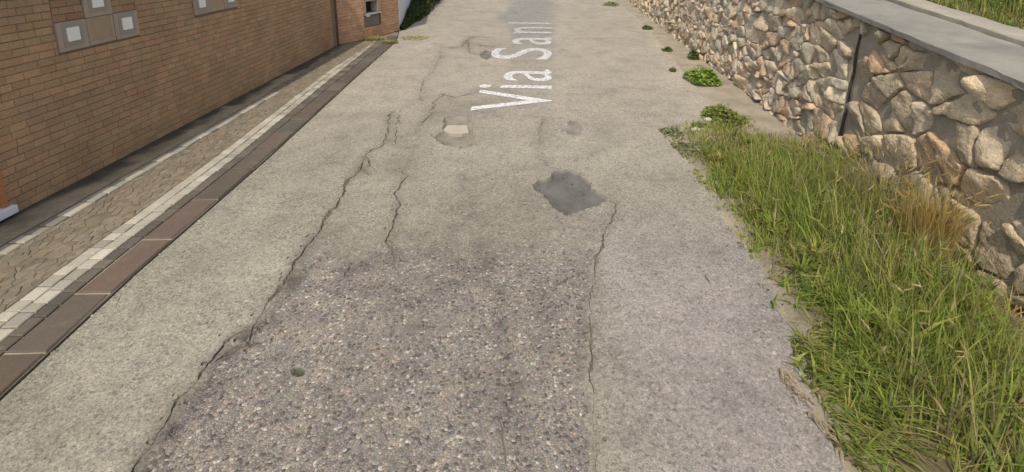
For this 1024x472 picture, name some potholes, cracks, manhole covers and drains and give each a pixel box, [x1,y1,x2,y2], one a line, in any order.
pothole [435,115,480,149]
crack [131,93,472,472]
